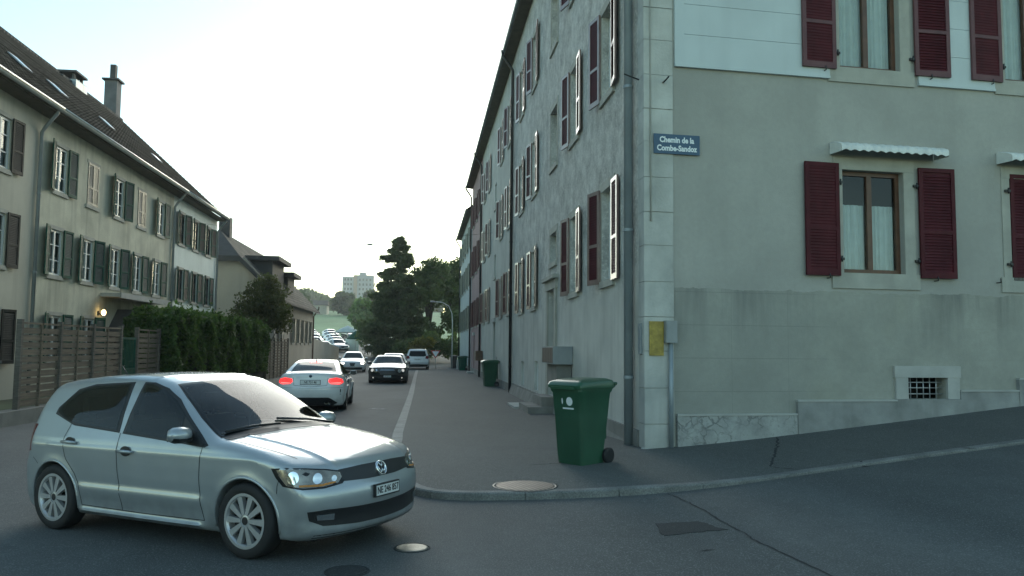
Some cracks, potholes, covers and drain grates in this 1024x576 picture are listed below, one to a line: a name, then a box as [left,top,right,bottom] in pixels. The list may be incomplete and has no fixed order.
manhole cover [324,565,370,576]
manhole cover [492,481,558,492]
manhole cover [393,543,430,553]
crack [769,437,791,469]
